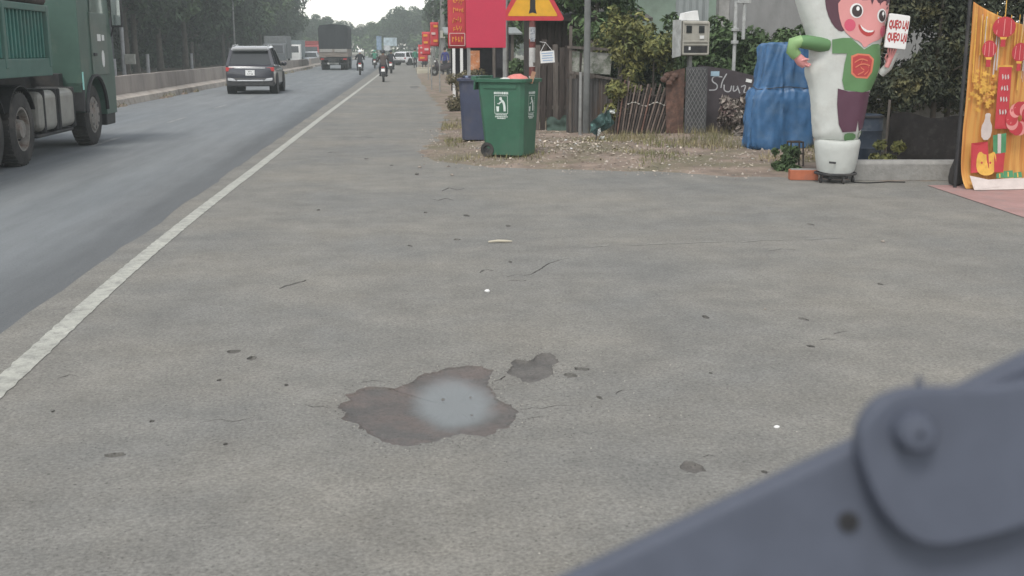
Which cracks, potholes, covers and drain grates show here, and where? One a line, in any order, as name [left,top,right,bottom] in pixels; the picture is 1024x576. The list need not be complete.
pothole [507,353,559,383]
pothole [338,365,519,446]
crack [480,258,567,281]
